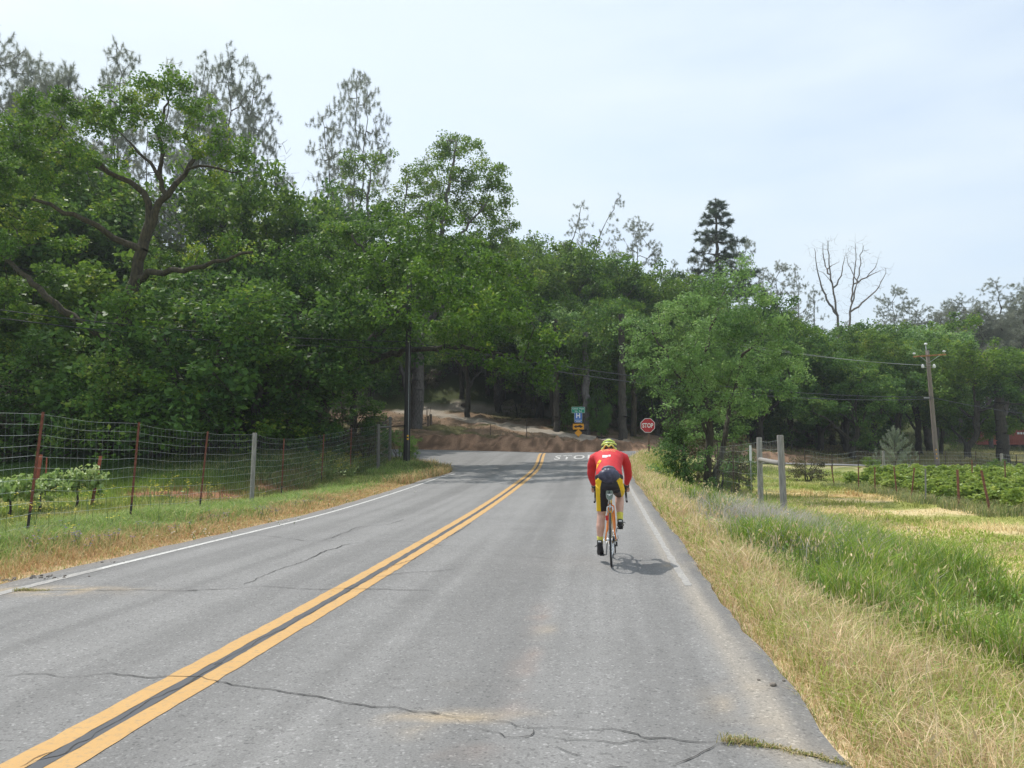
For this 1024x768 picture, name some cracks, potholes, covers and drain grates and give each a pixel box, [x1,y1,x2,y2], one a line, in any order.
crack [7,509,848,767]
